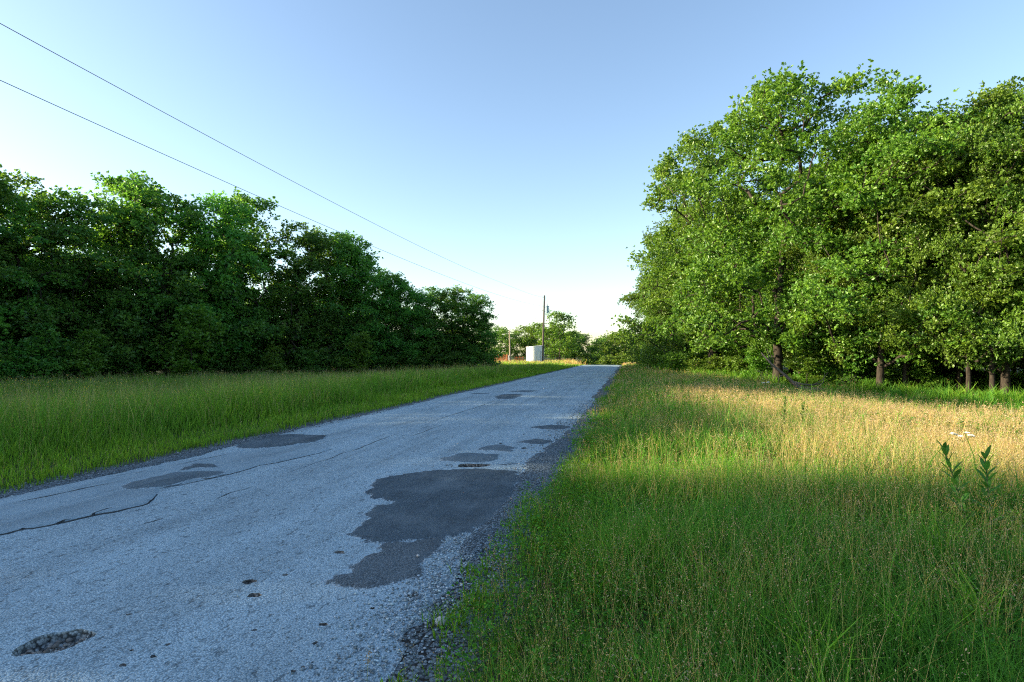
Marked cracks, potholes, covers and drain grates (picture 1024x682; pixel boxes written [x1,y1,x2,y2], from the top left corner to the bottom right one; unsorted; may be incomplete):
crack [0,430,395,535]
pothole [11,629,97,657]
